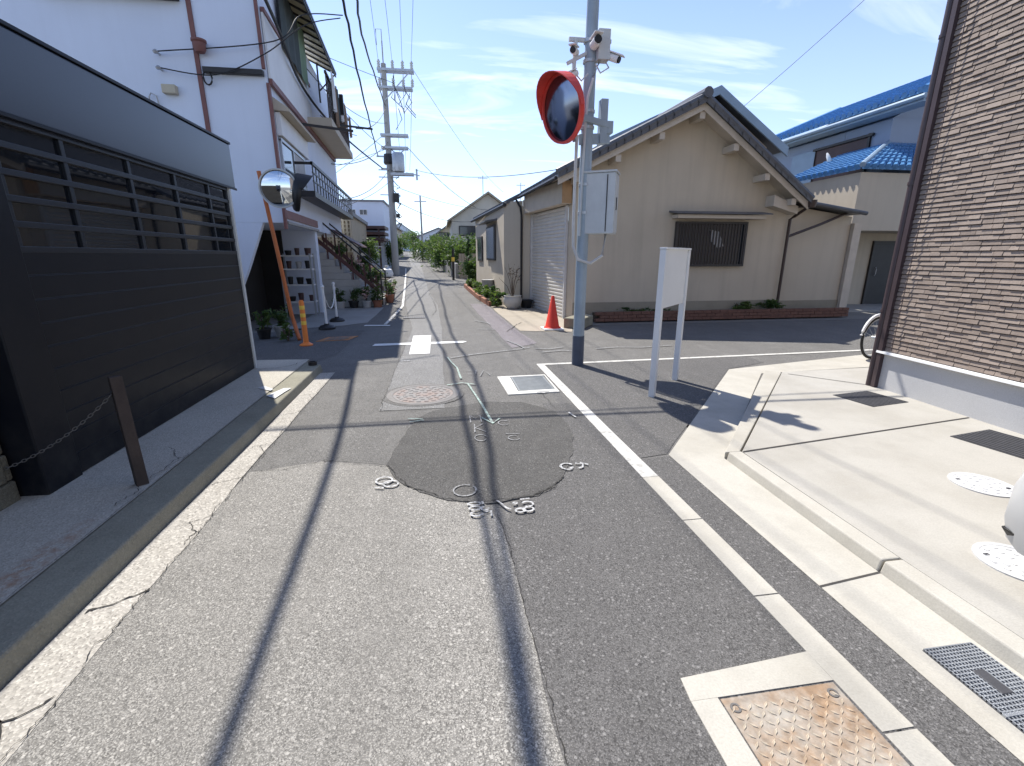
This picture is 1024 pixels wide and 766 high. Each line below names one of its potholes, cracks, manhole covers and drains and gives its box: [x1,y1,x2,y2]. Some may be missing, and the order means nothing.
drain grate [922,642,1024,734]
crack [0,392,564,761]
manhole cover [947,472,1014,498]
manhole cover [387,384,459,405]
manhole cover [971,542,1024,581]
